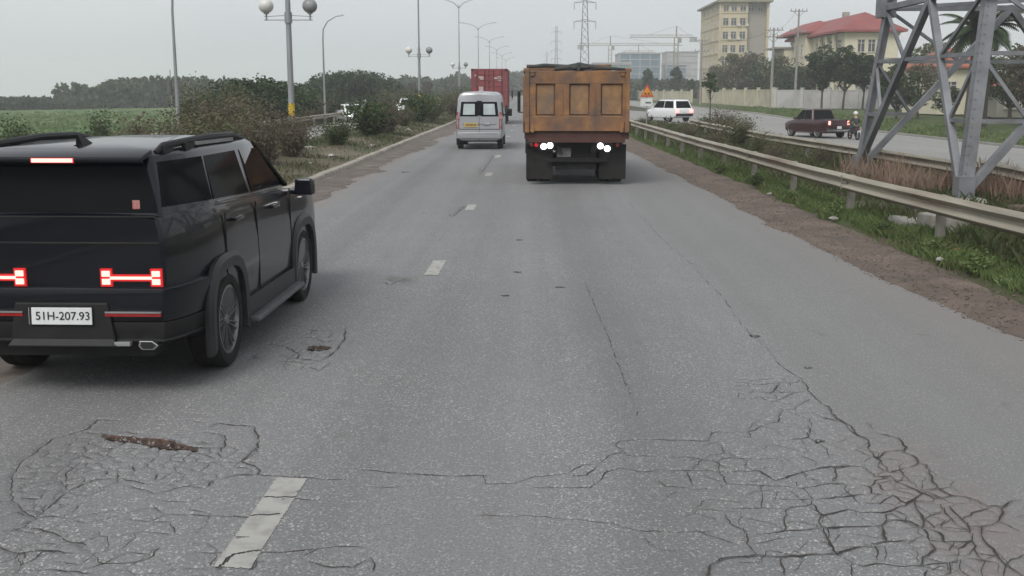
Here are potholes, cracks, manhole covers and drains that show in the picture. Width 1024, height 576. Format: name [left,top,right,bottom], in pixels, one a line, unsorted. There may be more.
crack [249,328,346,370]
crack [0,419,486,575]
pothole [102,435,197,452]
crack [587,286,638,415]
